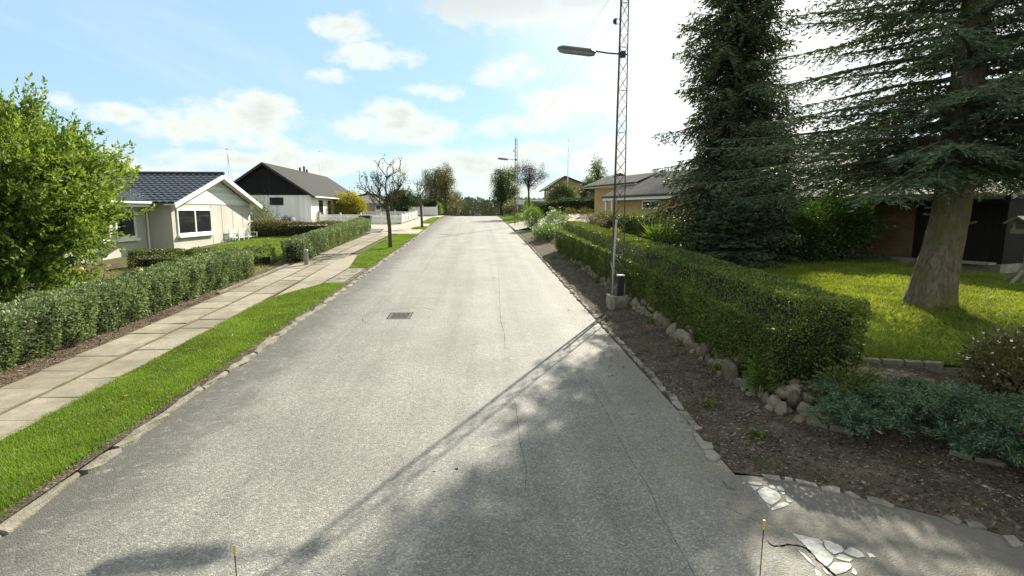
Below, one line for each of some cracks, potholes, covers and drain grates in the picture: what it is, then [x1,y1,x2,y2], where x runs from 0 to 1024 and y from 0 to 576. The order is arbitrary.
crack [768,542,836,576]
